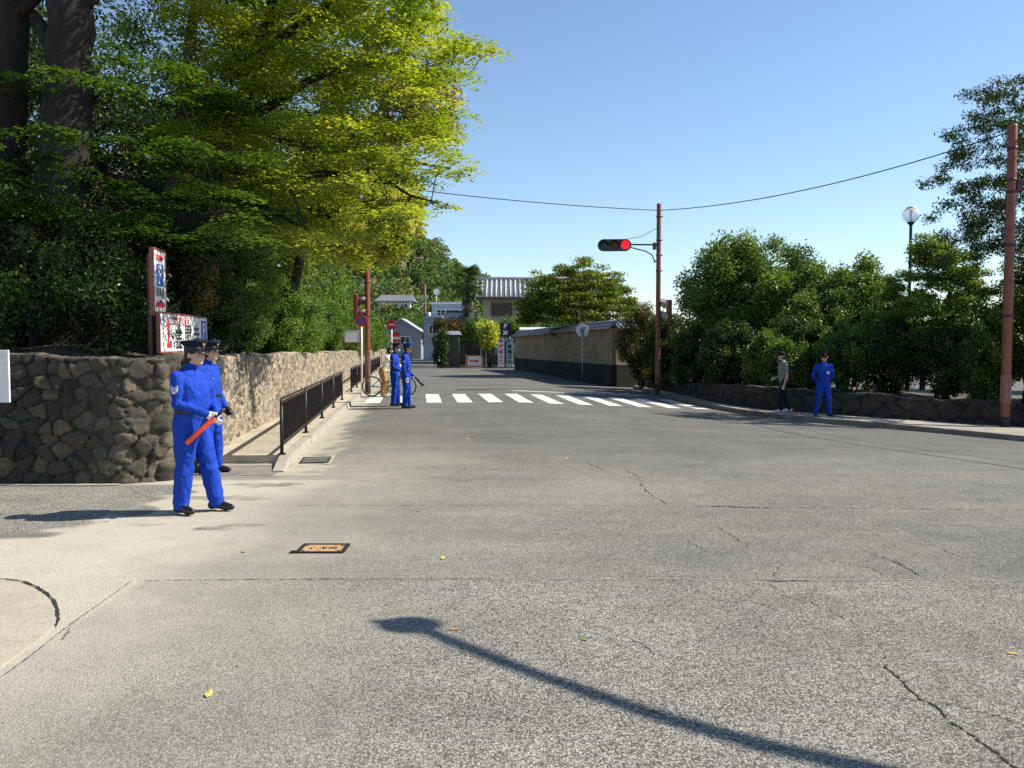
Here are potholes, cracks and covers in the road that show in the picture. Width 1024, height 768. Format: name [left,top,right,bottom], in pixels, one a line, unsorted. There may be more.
crack [768,568,1021,768]
crack [566,469,1002,510]
drain grate [299,456,331,464]
manhole cover [289,543,350,554]
